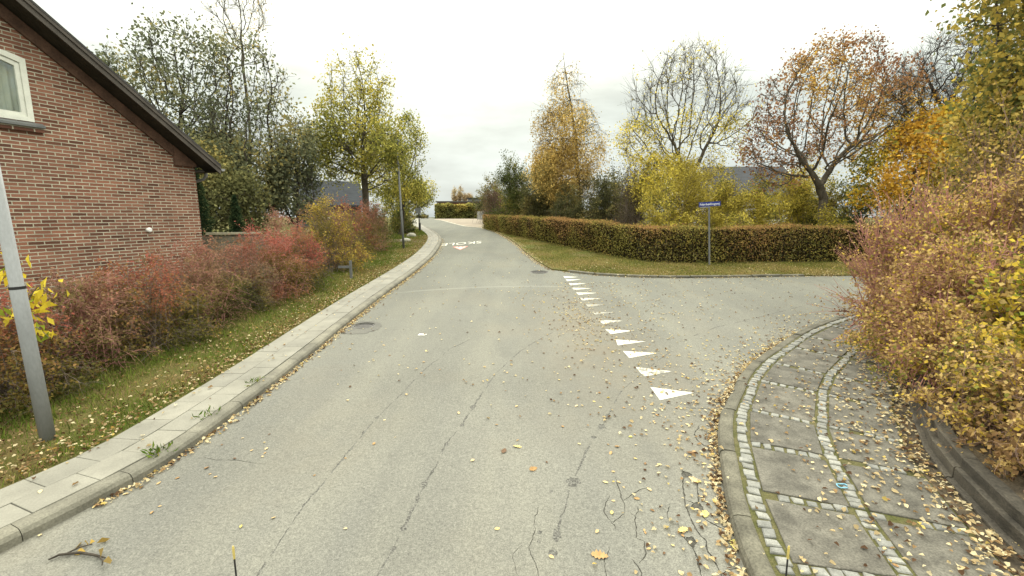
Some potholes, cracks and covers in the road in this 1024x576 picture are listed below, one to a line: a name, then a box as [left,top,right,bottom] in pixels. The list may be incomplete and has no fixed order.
crack [377,332,553,576]
crack [667,470,736,576]
crack [257,340,468,576]
crack [512,351,672,576]
